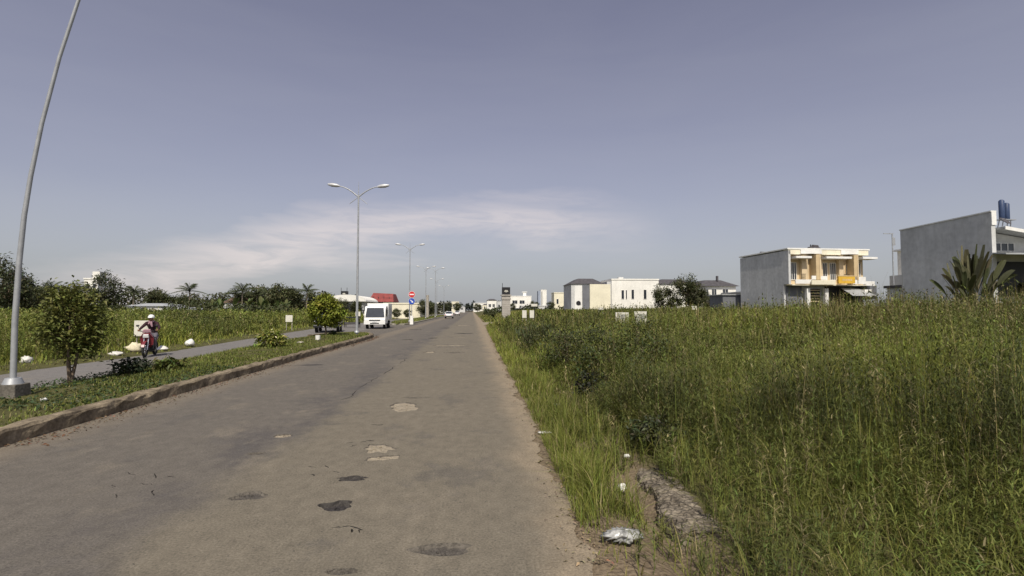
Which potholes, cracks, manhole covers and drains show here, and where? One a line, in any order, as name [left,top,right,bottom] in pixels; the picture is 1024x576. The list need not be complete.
pothole [227,490,268,500]
pothole [317,500,353,511]
pothole [407,543,473,556]
